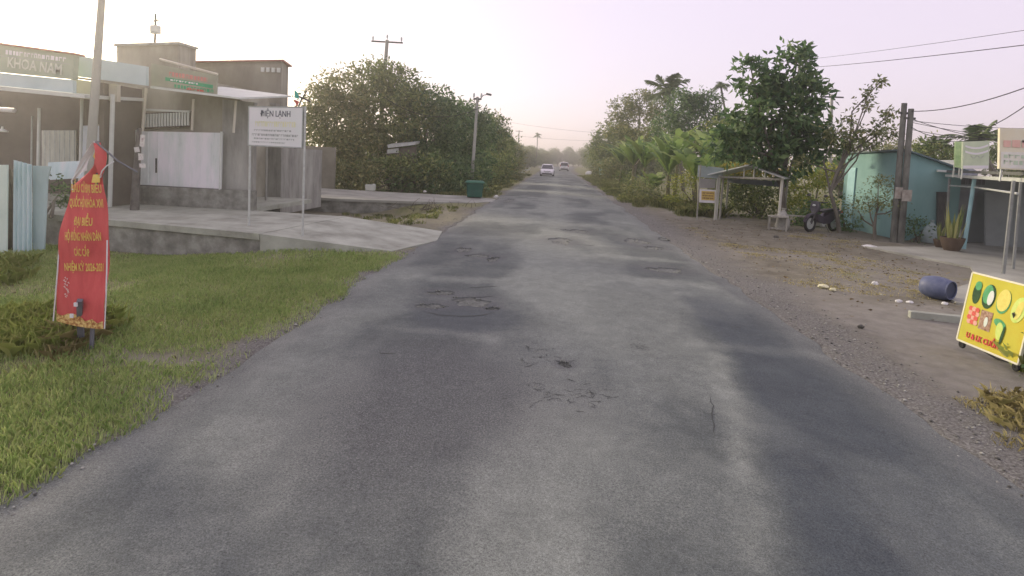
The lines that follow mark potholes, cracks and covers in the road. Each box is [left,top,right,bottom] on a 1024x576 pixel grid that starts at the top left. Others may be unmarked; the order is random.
crack [489,342,619,412]
pothole [548,237,573,245]
pothole [453,296,492,307]
